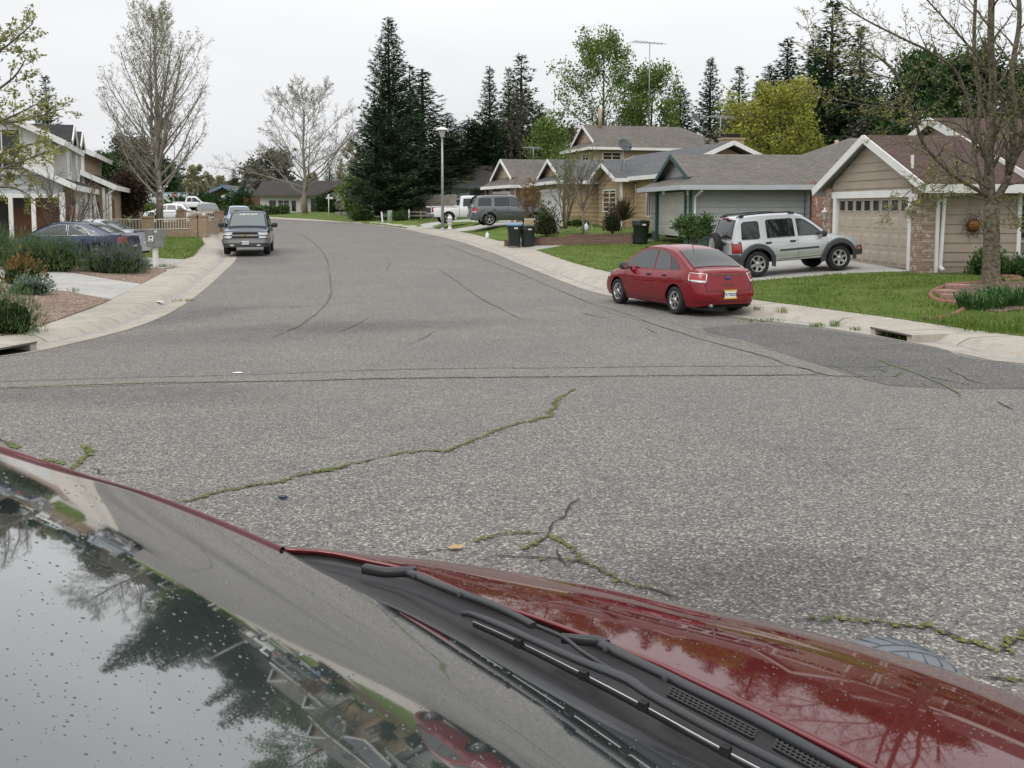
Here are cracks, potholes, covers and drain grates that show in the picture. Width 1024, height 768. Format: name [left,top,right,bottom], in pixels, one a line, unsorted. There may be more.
drain grate [870,325,956,348]
drain grate [0,340,37,357]
crack [174,388,575,502]
crack [832,359,980,397]
crack [439,270,520,318]
crack [211,235,389,338]
crack [794,614,1024,682]
crack [407,498,683,599]
